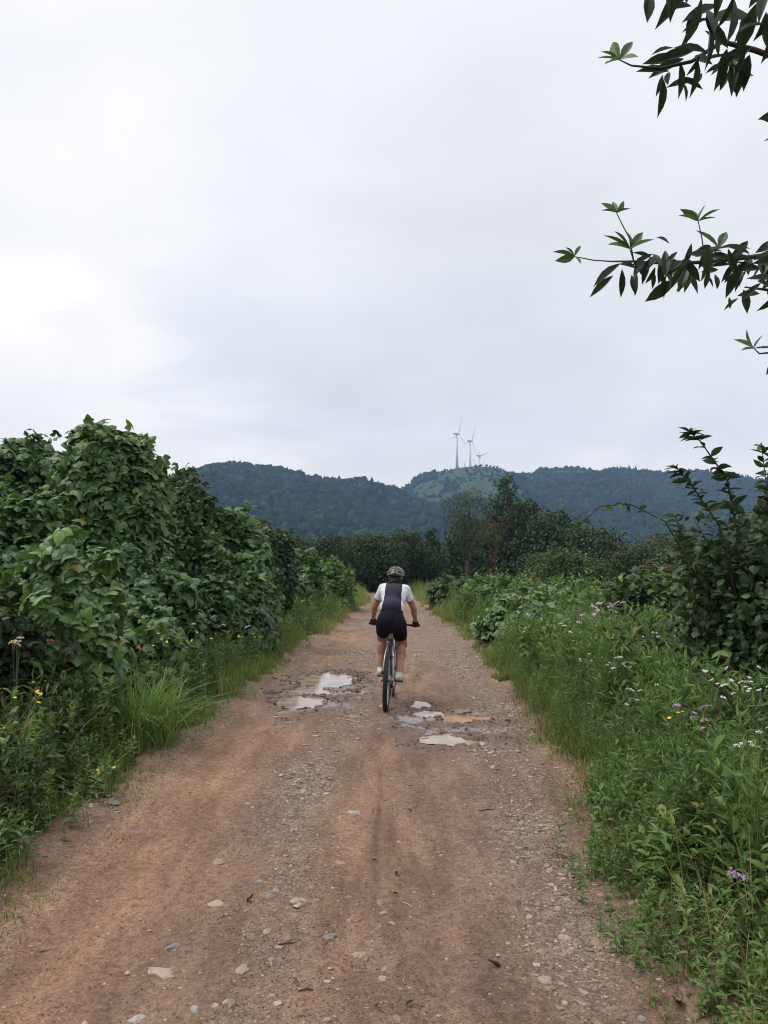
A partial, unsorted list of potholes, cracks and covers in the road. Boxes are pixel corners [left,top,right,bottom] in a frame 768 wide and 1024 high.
pothole [284,685,336,695]
pothole [290,669,367,688]
pothole [440,712,492,723]
pothole [407,701,435,709]
pothole [273,695,335,709]
pothole [416,732,485,746]
